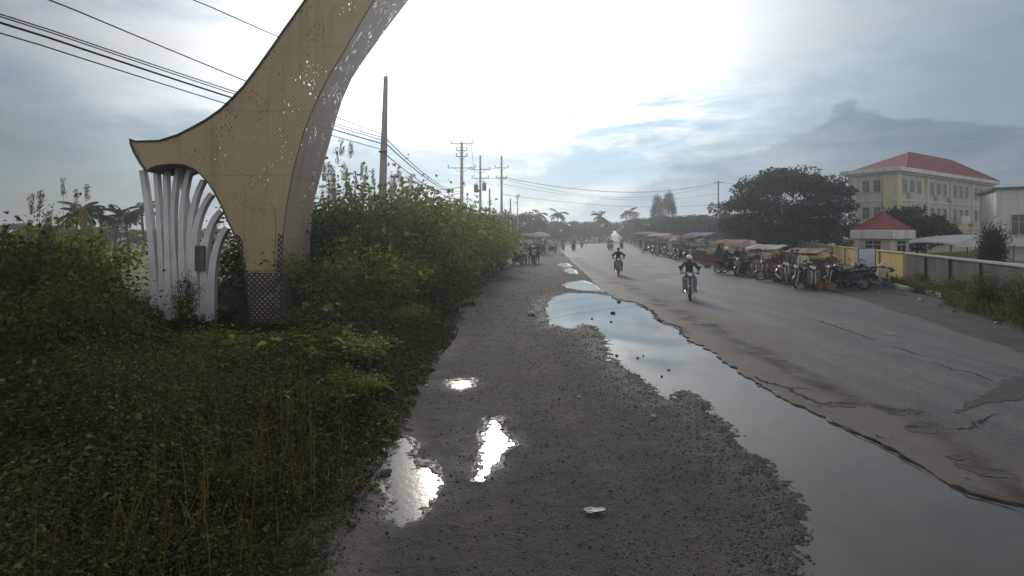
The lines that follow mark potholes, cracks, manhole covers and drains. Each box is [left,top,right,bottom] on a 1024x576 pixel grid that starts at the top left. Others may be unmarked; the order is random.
pothole [469,415,520,483]
pothole [376,435,445,528]
pothole [445,378,478,391]
crack [950,413,1000,429]
crack [808,318,992,381]
